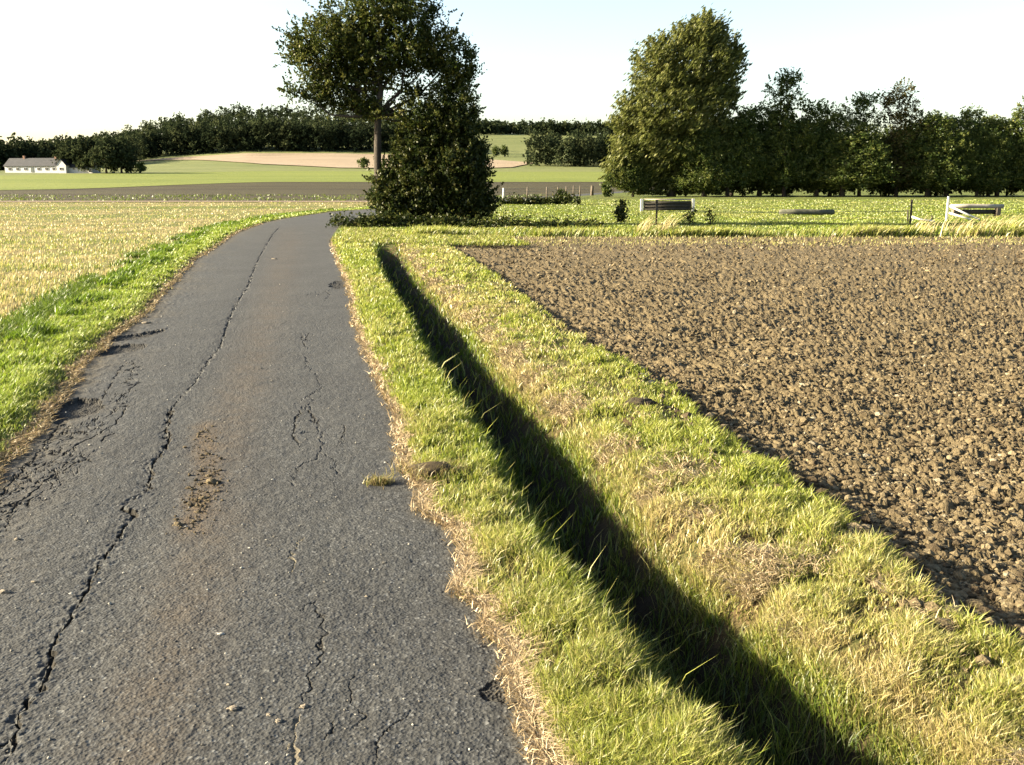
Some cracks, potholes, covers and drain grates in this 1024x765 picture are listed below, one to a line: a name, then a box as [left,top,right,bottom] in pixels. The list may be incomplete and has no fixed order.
crack [305,610,327,694]
crack [348,675,404,760]
pothole [48,397,106,425]
pothole [477,679,517,707]
crack [285,715,301,765]
crack [291,410,319,443]
